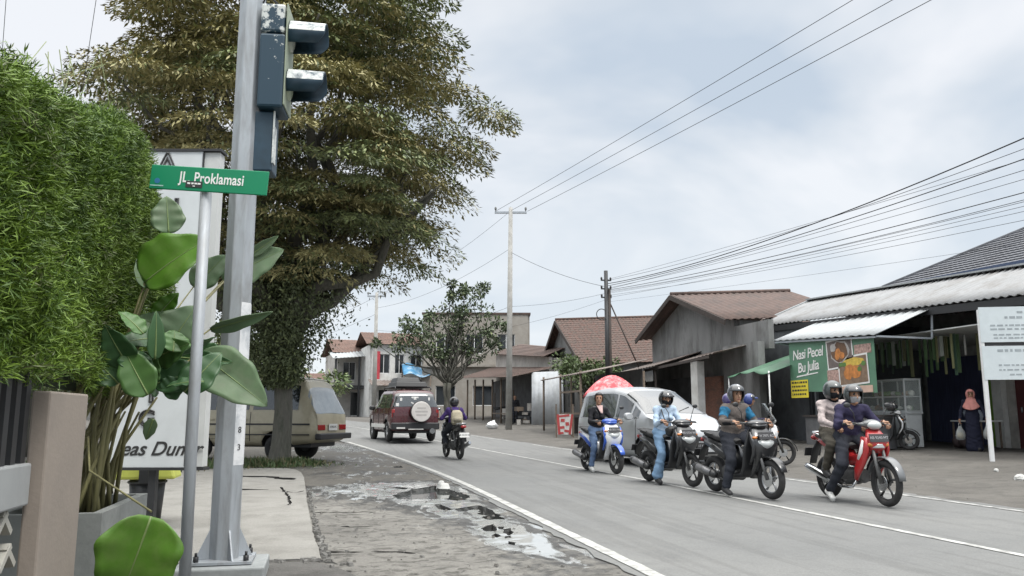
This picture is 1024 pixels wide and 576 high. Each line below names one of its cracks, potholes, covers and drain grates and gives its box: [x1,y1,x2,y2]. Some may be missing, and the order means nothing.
pothole [394,486,469,501]
pothole [456,506,503,520]
